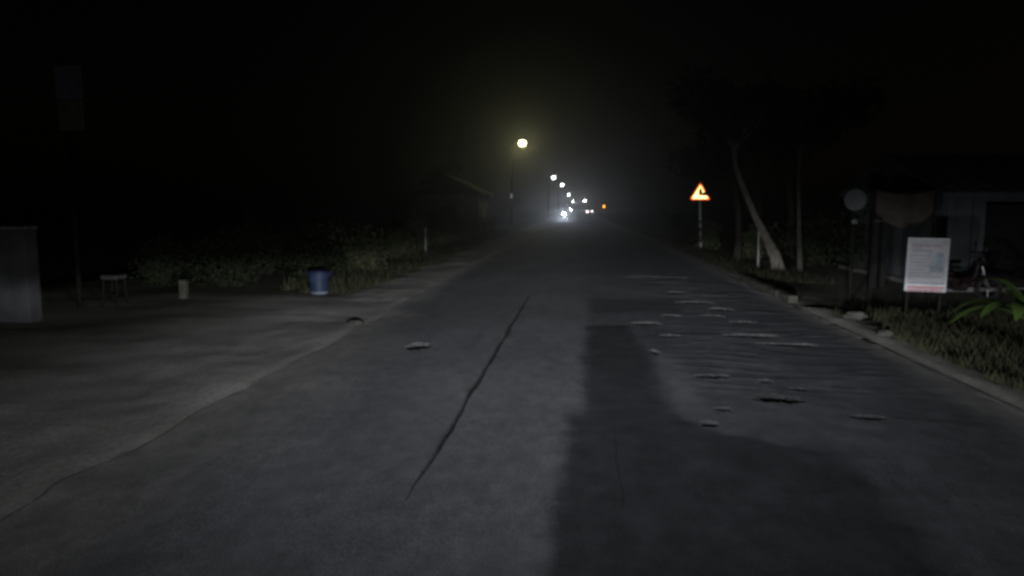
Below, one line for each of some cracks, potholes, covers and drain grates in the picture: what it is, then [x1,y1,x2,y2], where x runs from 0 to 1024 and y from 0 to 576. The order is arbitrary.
crack [613,427,623,508]
pothole [752,393,808,404]
pothole [405,342,432,350]
crack [405,297,530,501]
